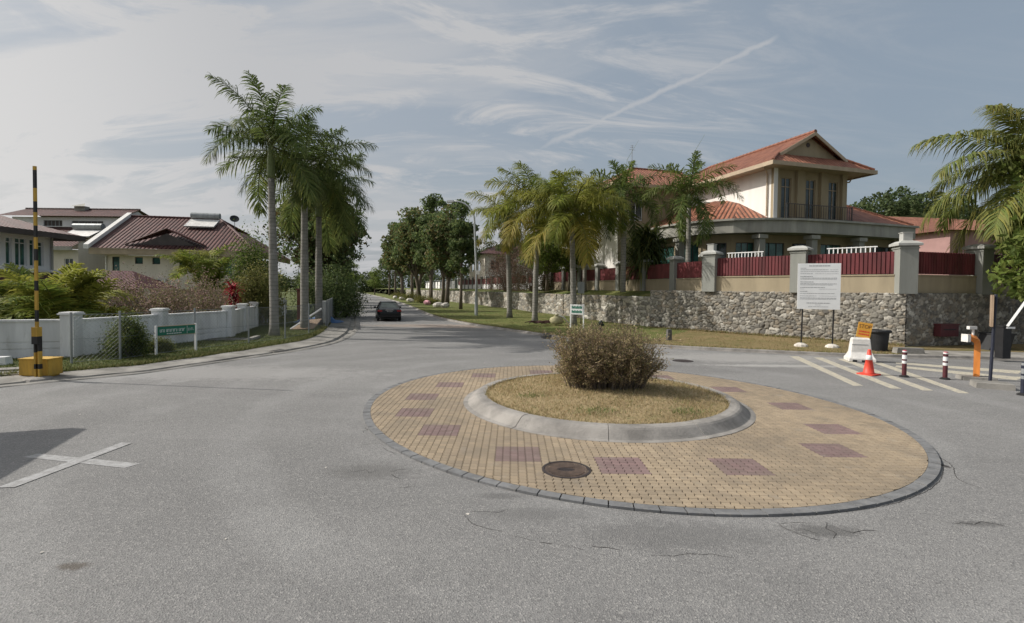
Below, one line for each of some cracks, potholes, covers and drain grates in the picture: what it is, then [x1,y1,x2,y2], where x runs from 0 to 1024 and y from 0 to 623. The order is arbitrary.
crack [779,522,876,540]
manhole cover [542,461,591,479]
crack [468,510,614,550]
